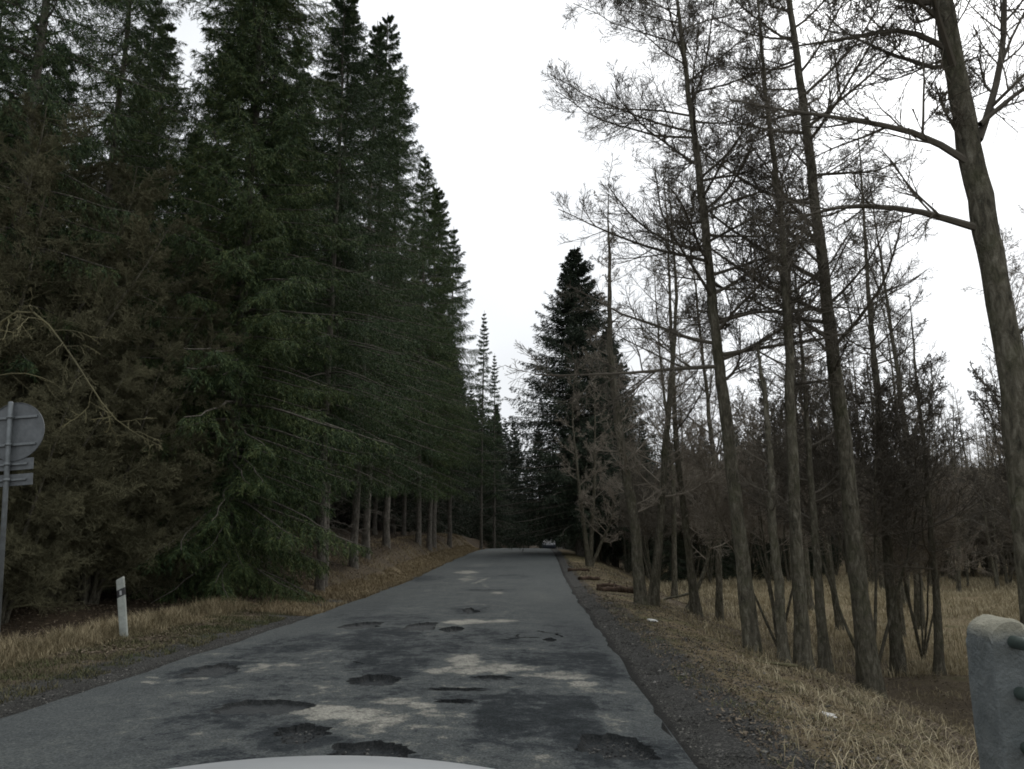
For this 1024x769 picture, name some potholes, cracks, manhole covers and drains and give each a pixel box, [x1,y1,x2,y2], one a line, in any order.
pothole [346,674,403,686]
pothole [210,699,316,716]
pothole [179,663,240,679]
pothole [327,740,417,758]
pothole [401,622,438,632]
pothole [574,733,662,761]
pothole [274,723,333,745]
